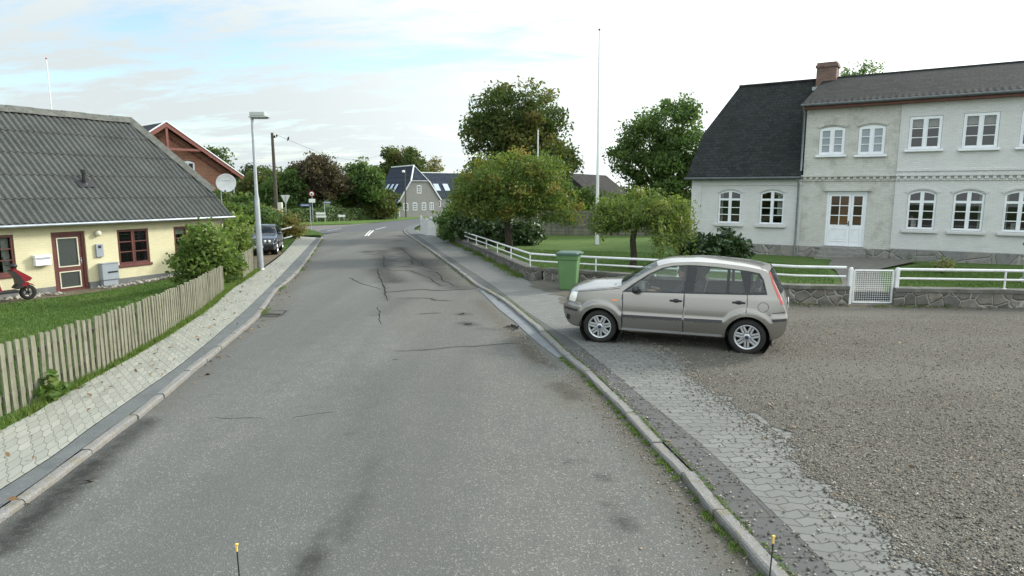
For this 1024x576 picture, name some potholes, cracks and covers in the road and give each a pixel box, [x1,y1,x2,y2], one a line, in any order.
crack [381,250,457,314]
